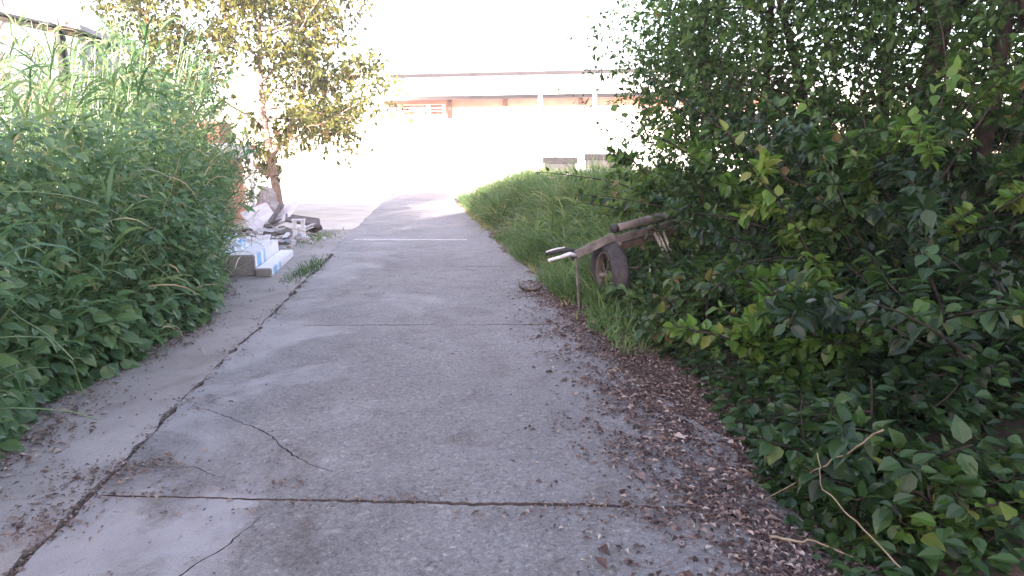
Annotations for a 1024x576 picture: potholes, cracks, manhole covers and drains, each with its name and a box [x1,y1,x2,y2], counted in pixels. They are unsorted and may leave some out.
crack [193,405,332,472]
crack [179,512,266,576]
